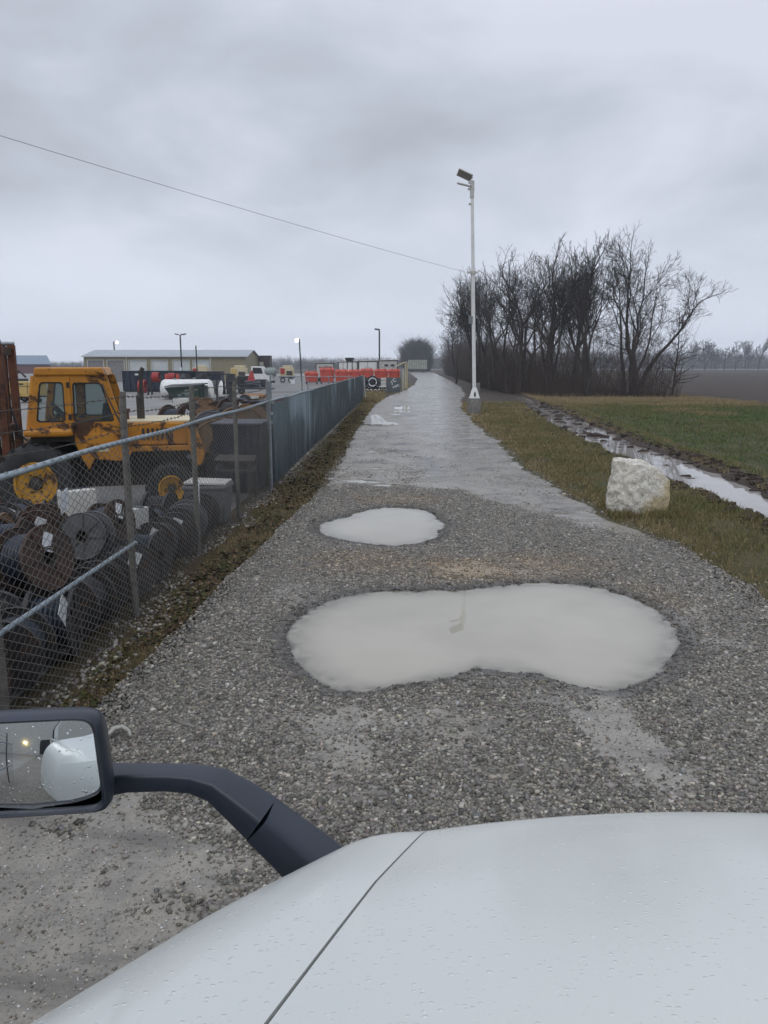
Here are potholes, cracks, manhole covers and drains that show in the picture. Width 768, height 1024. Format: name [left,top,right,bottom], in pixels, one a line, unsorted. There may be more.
pothole [309,505,454,548]
pothole [272,578,698,697]
